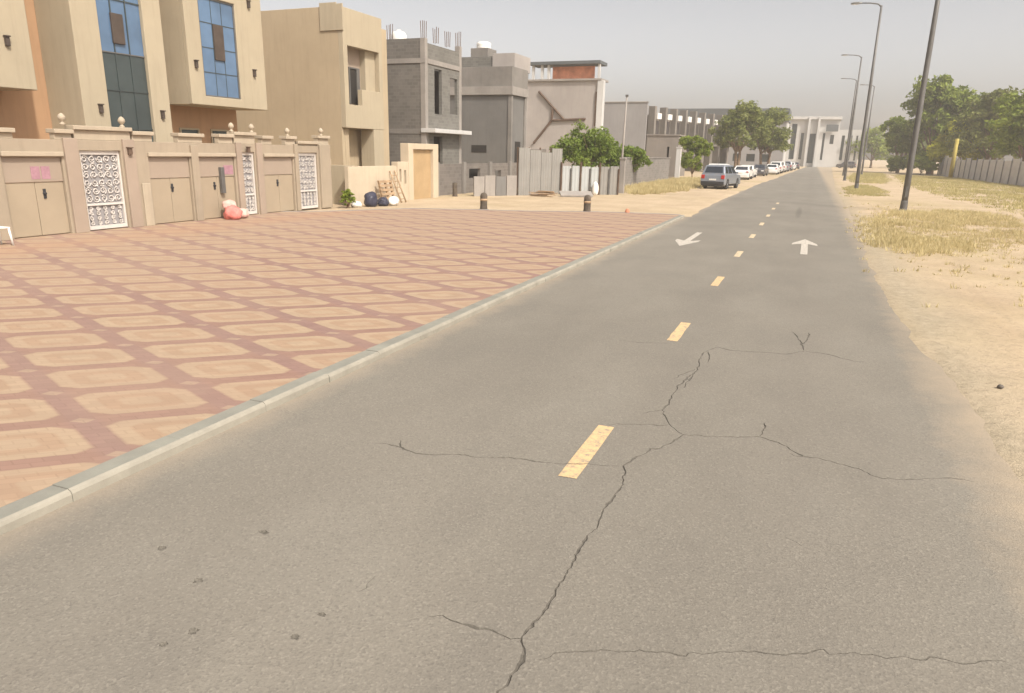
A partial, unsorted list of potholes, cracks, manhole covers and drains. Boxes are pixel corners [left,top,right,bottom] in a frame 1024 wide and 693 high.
crack [376,333,1009,693]
